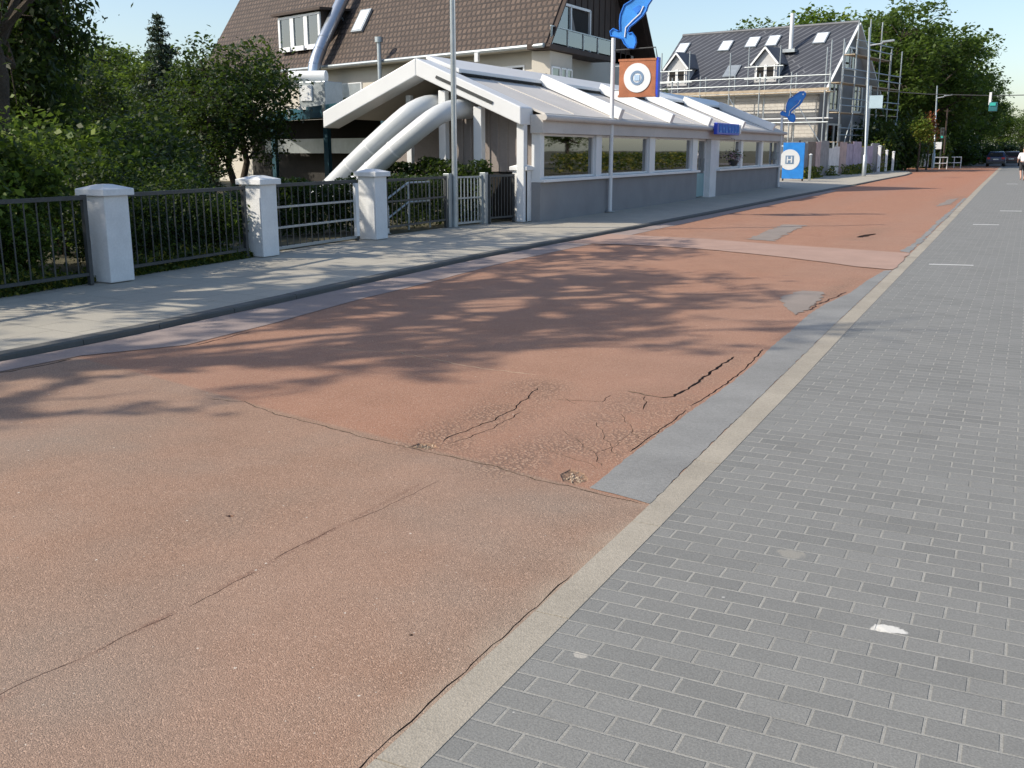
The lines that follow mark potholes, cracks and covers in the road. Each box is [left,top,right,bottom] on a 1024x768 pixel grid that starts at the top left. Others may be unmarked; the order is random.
crack [359,575,571,768]
pothole [560,469,588,485]
crack [214,348,763,504]
